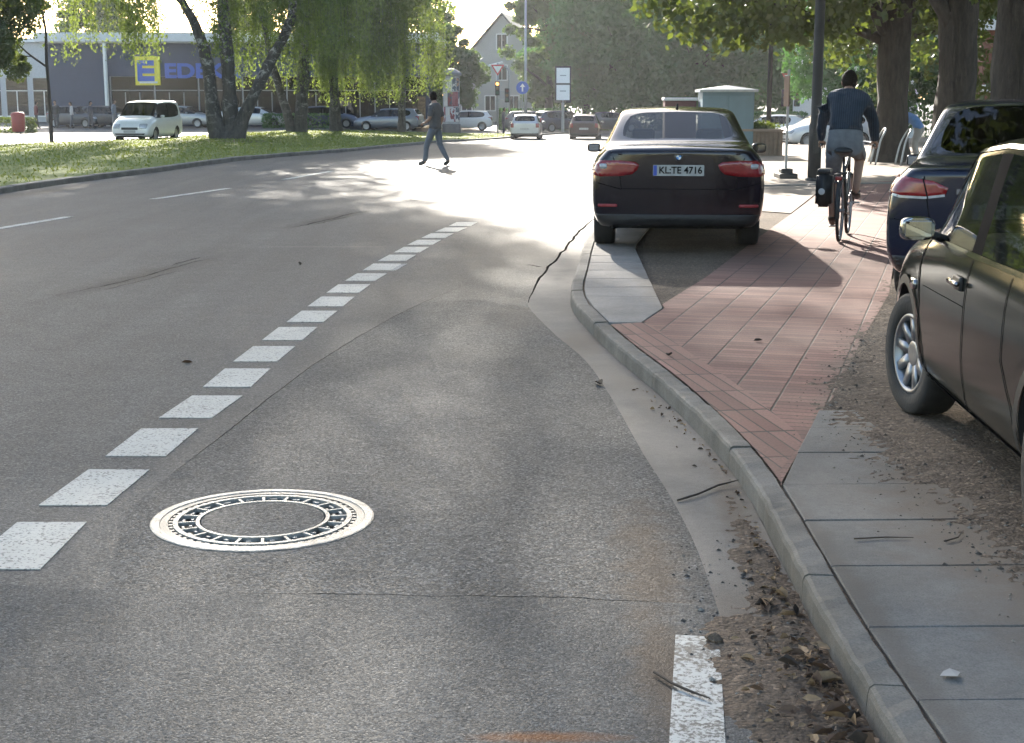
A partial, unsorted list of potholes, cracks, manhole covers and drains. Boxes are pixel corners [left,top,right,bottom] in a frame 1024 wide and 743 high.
crack [528,219,594,302]
manhole cover [150,489,374,552]
